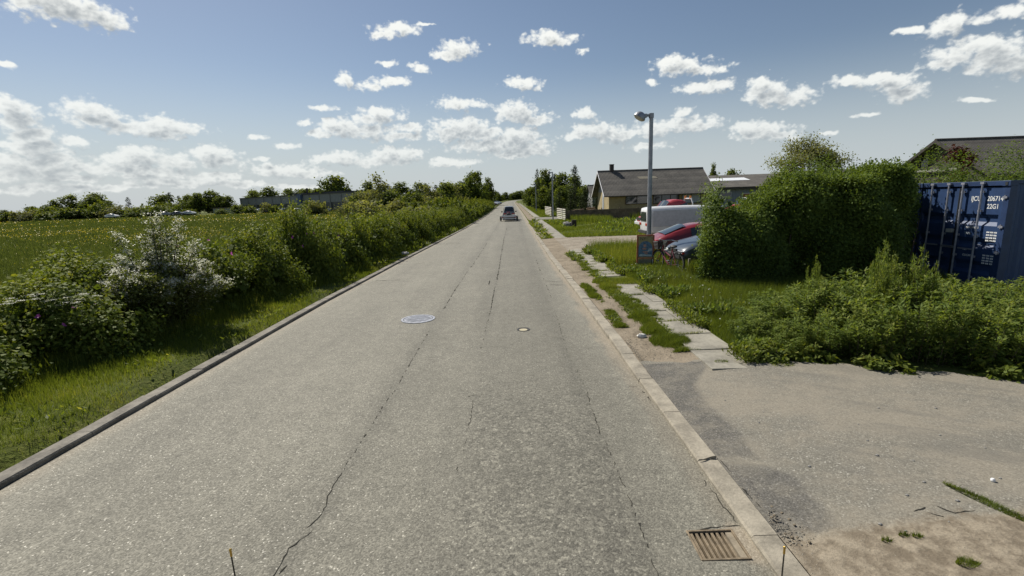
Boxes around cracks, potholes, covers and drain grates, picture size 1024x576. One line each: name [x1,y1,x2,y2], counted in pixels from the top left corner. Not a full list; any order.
manhole cover [401,315,435,324]
crack [273,334,428,576]
drain grate [686,529,752,561]
crack [556,316,659,576]
